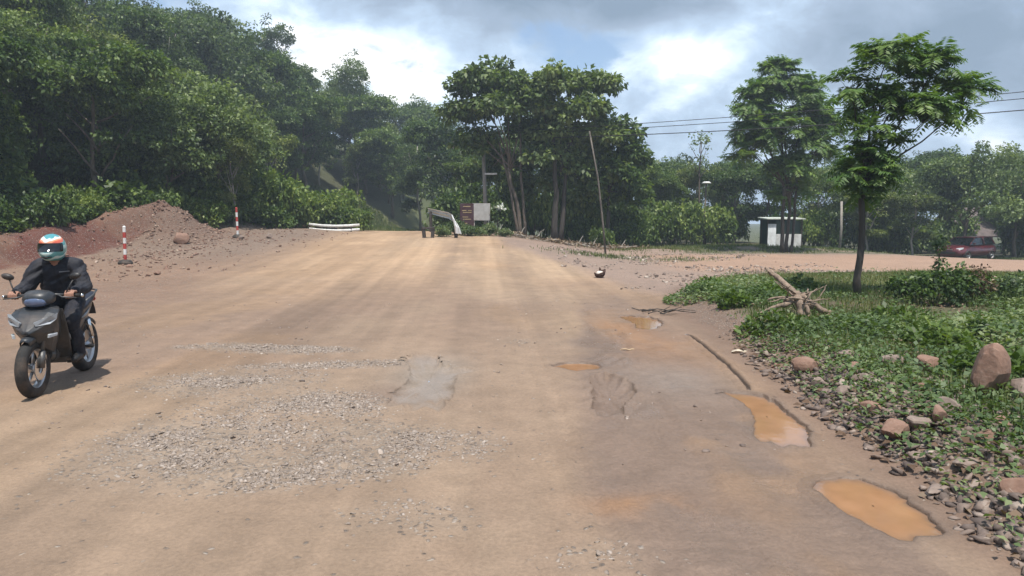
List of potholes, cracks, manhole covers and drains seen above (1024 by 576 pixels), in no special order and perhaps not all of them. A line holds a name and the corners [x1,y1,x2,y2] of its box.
pothole [715,388,824,451]
pothole [796,472,964,549]
pothole [544,361,609,373]
pothole [614,315,669,331]
pothole [377,352,484,415]
crack [681,334,763,391]
pothole [580,370,646,420]
